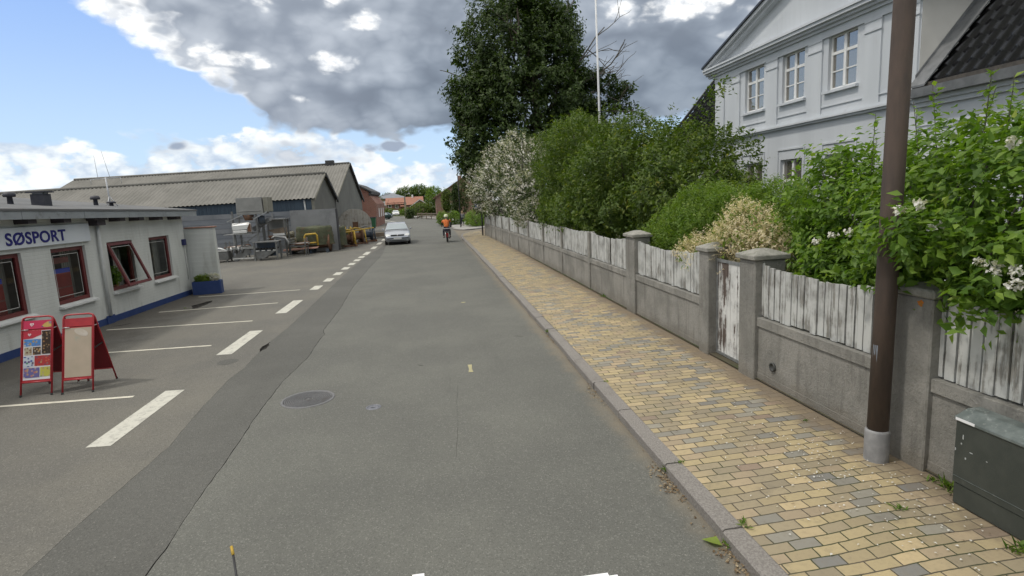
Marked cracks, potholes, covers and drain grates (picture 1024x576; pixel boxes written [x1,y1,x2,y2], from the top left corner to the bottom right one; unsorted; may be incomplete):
manhole cover [280,390,335,409]
